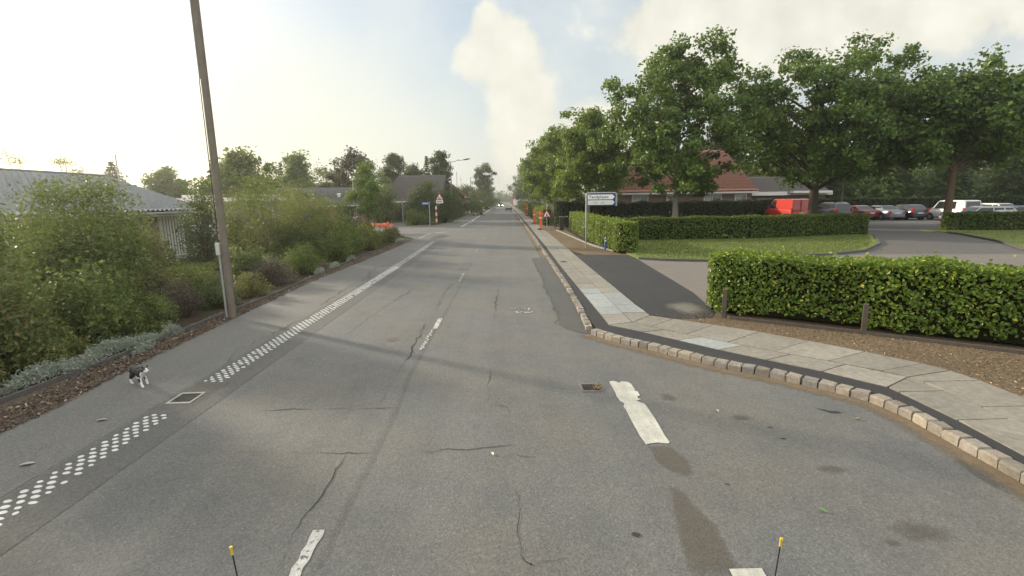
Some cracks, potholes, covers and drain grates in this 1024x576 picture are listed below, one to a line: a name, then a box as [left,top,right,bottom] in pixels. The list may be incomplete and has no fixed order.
drain grate [579,383,602,392]
crack [227,381,376,564]
drain grate [165,392,206,404]
